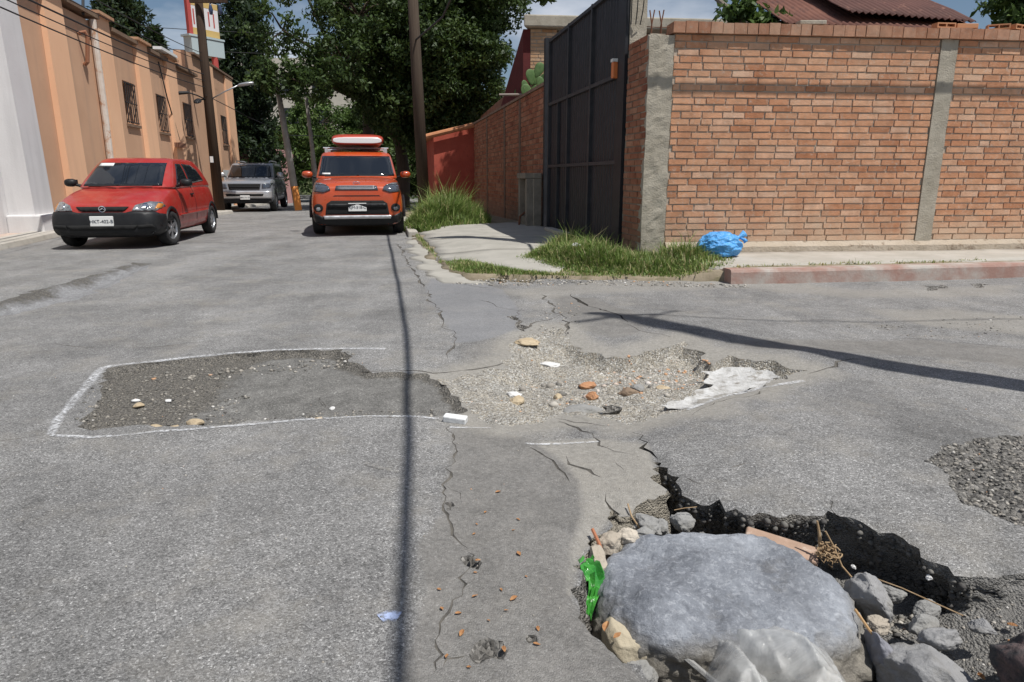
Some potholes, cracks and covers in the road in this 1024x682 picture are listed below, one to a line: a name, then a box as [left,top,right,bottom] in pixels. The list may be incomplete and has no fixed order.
crack [530,418,657,481]
crack [481,294,670,337]
pothole [570,462,1024,682]
pothole [927,435,1024,526]
crack [363,290,506,374]
pothole [437,328,808,426]
